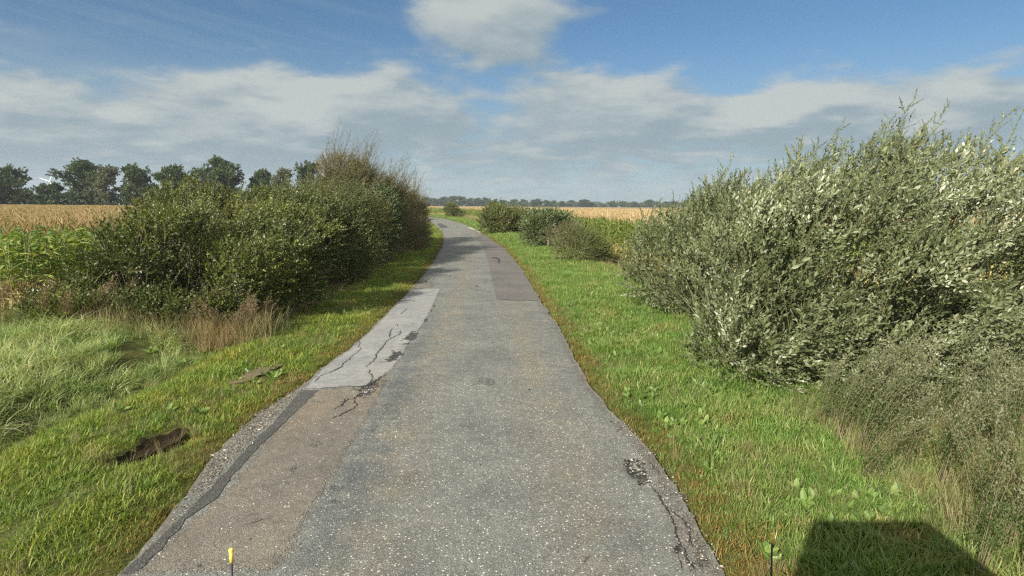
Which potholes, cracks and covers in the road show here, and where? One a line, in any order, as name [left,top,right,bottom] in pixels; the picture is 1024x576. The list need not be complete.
pothole [624,458,651,483]
crack [653,489,694,571]
crack [305,309,406,420]
